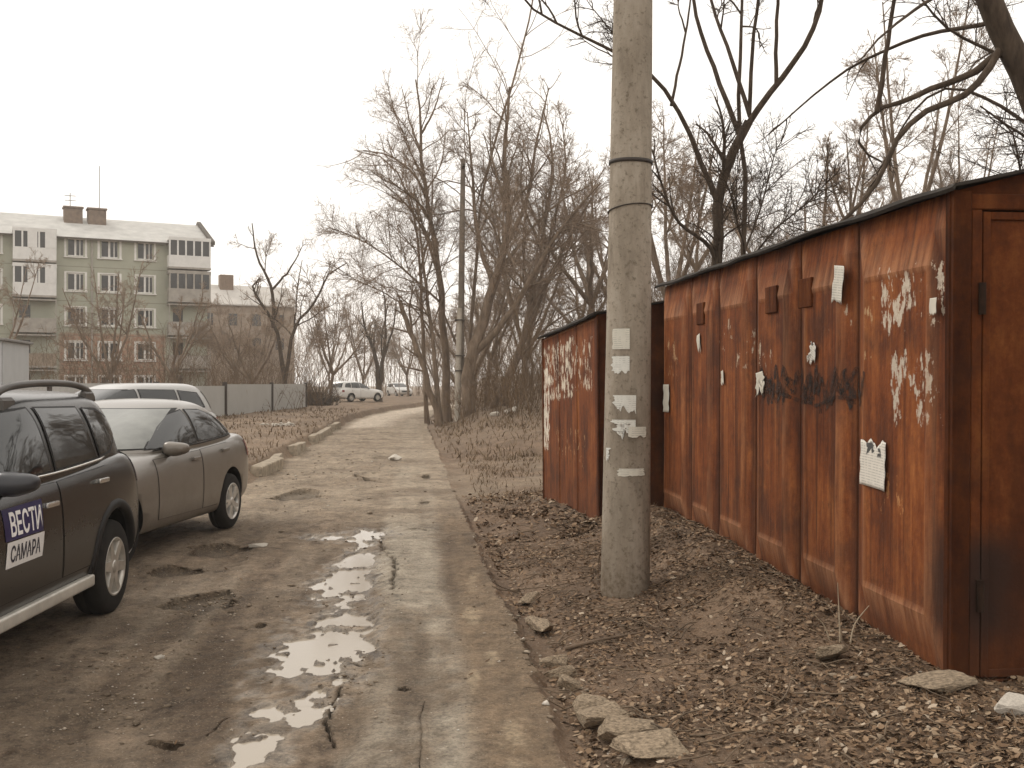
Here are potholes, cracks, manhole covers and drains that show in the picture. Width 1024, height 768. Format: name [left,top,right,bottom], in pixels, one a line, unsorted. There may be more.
pothole [246,622,275,631]
pothole [261,488,328,503]
crack [412,701,431,768]
pothole [149,588,248,615]
pothole [181,542,262,561]
crack [315,660,381,750]
pothole [139,739,194,755]
pothole [138,563,214,580]
